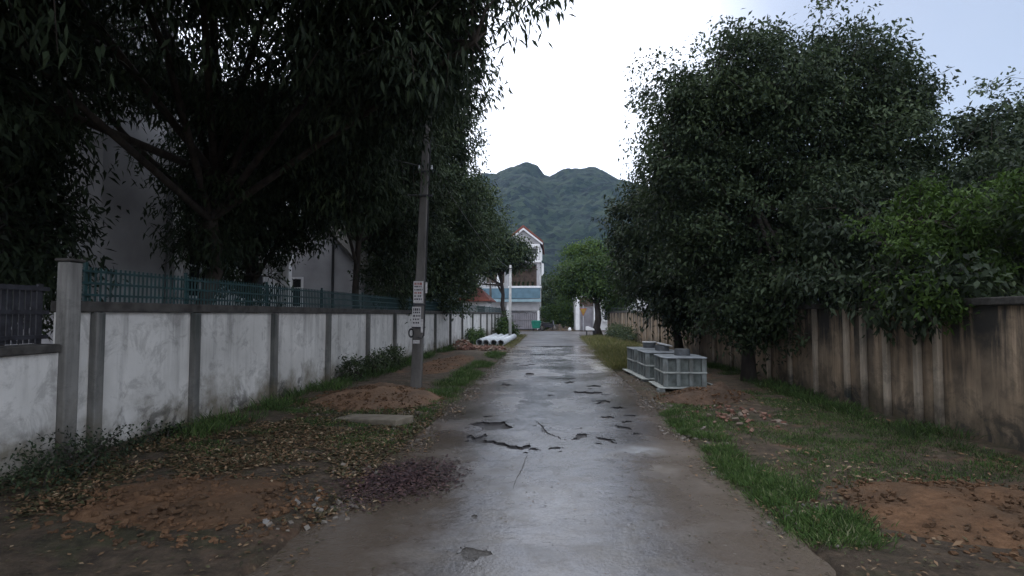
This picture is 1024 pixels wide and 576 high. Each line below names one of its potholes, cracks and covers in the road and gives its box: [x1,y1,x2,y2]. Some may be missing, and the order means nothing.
crack [465,381,641,488]
pothole [460,547,493,562]
pothole [471,421,514,431]
